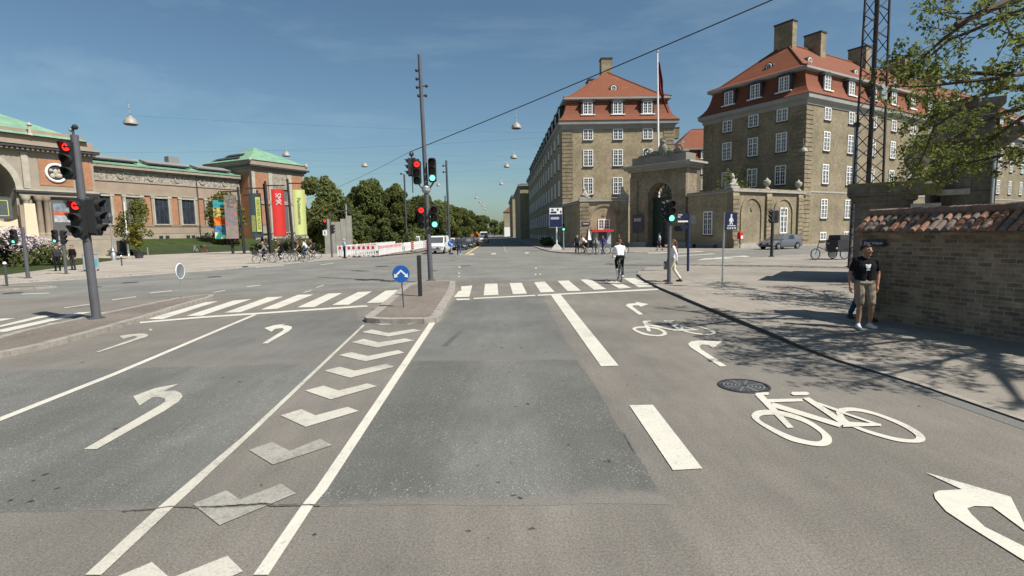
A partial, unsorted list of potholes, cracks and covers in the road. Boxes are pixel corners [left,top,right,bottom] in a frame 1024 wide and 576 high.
crack [122,503,412,512]
manhole cover [717,379,771,393]
